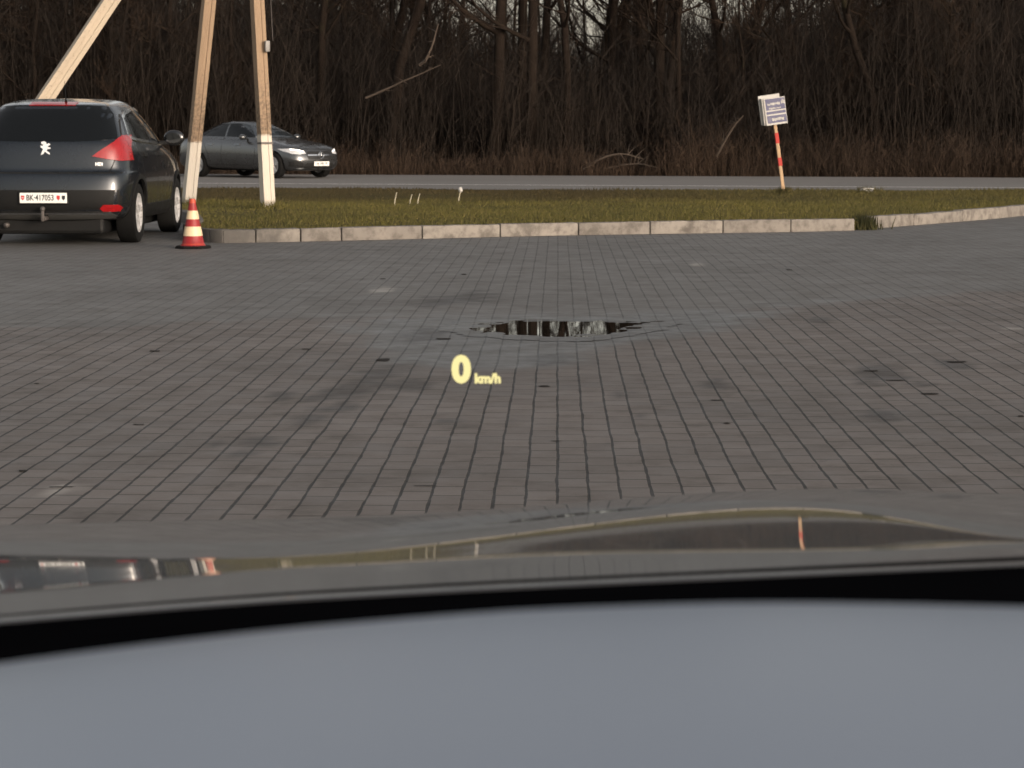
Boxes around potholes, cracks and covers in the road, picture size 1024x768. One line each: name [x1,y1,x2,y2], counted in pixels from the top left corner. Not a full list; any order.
pothole [439,317,682,342]
